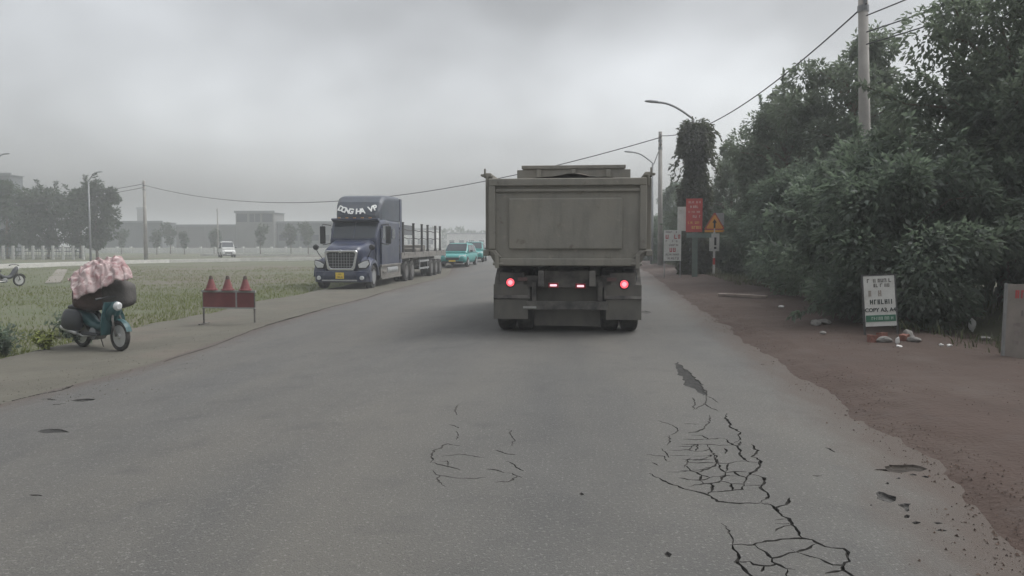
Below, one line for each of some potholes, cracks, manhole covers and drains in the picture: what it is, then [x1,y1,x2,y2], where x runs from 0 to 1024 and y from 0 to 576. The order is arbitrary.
pothole [876,491,896,503]
pothole [675,362,707,396]
crack [430,405,524,487]
crack [649,390,854,576]
pothole [875,465,926,473]
